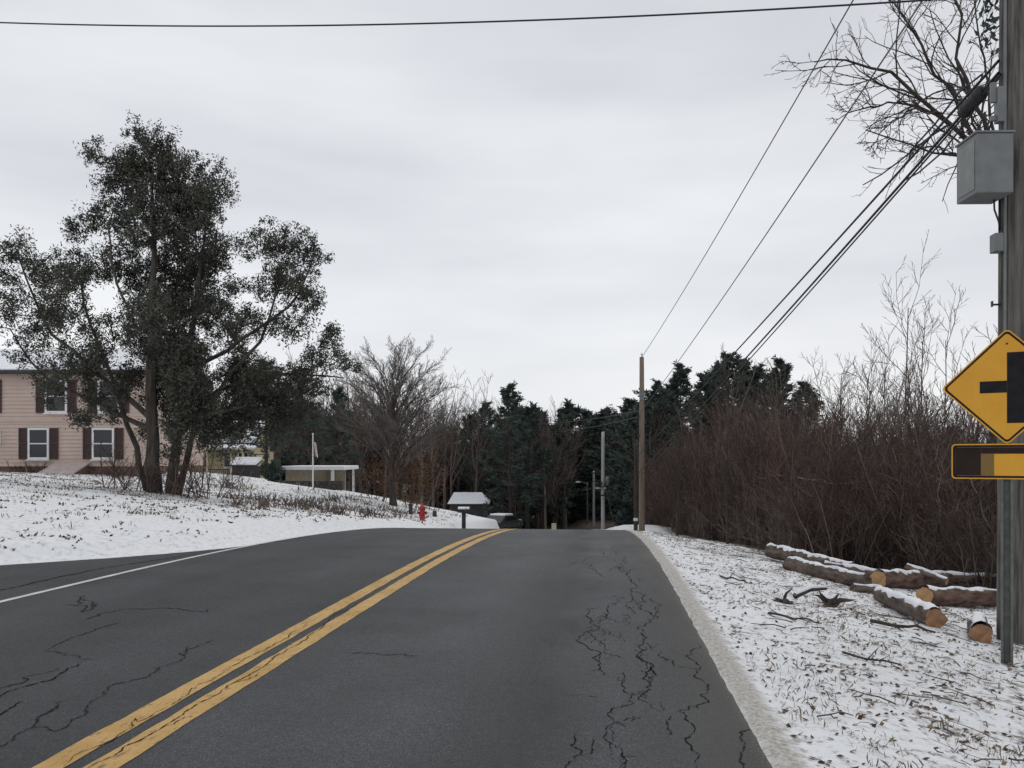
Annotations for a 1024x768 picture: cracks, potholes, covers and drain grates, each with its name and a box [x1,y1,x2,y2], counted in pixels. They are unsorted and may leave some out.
crack [666,646,710,768]
crack [0,596,209,746]
crack [564,551,674,768]
crack [739,729,751,768]
